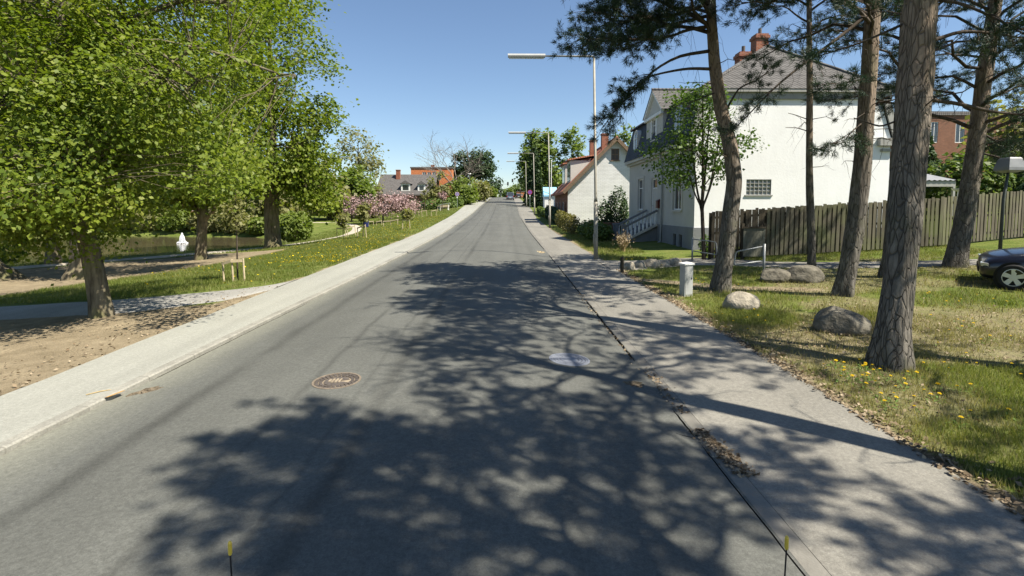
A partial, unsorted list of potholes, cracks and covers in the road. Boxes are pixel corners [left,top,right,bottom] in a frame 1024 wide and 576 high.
manhole cover [312,372,361,389]
manhole cover [549,353,590,366]
